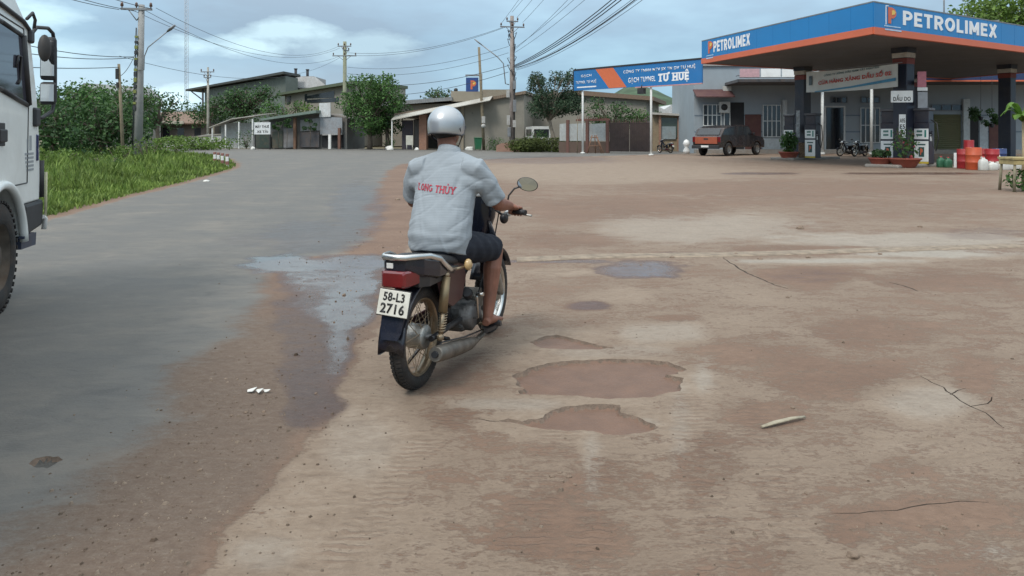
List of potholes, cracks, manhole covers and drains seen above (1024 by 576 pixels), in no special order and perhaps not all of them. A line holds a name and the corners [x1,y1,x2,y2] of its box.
pothole [530,335,614,349]
crack [725,259,788,289]
pothole [500,404,658,435]
pothole [29,456,62,468]
pothole [512,359,687,399]
crack [839,501,989,514]
crack [921,376,1004,428]
